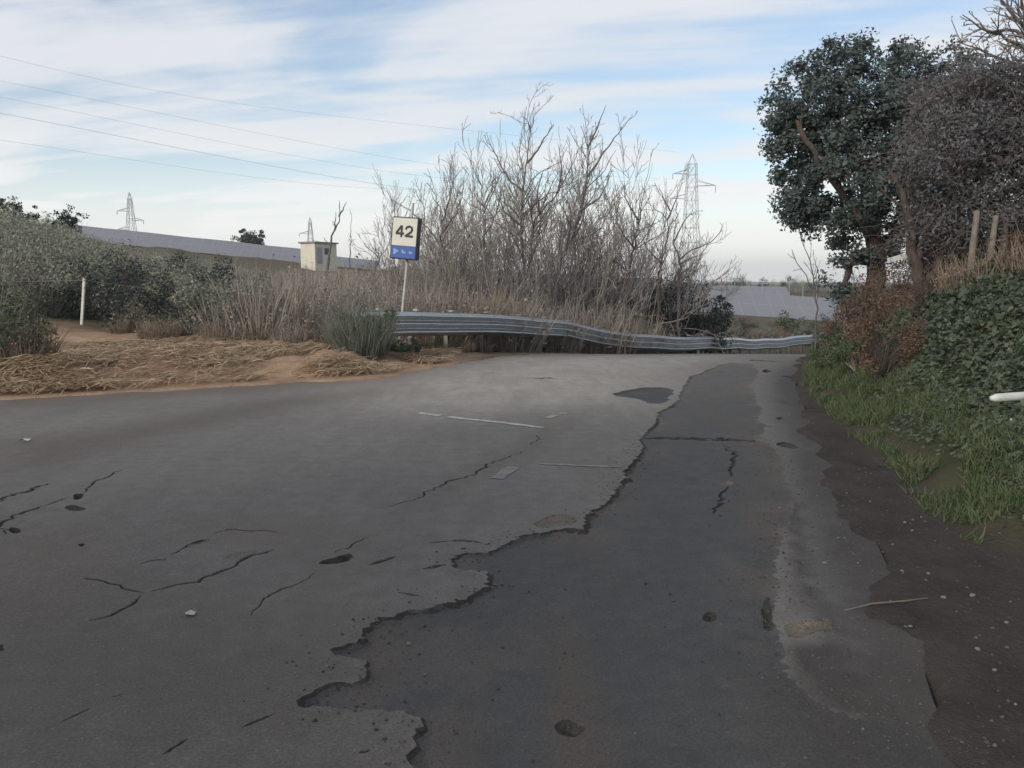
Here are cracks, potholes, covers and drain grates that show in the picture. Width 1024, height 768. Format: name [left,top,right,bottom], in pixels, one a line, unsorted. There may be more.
pothole [554,719,585,737]
crack [0,484,65,534]
pothole [761,598,774,631]
crack [84,529,314,621]
crack [646,426,778,514]
pothole [319,554,353,564]
crack [335,537,396,565]
